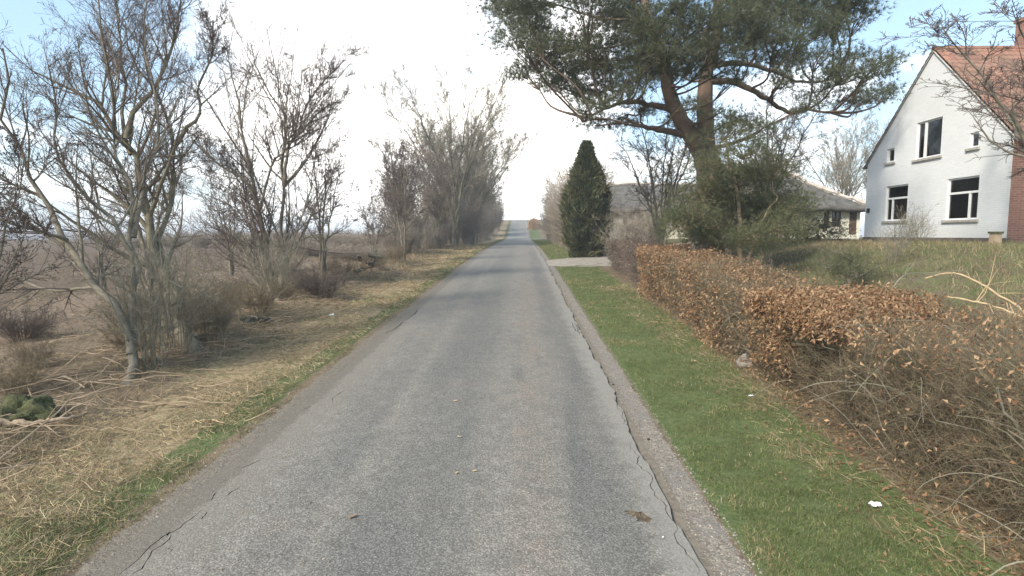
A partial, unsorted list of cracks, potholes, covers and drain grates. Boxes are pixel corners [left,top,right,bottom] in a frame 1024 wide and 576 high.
crack [119,458,263,575]
crack [614,399,698,567]
